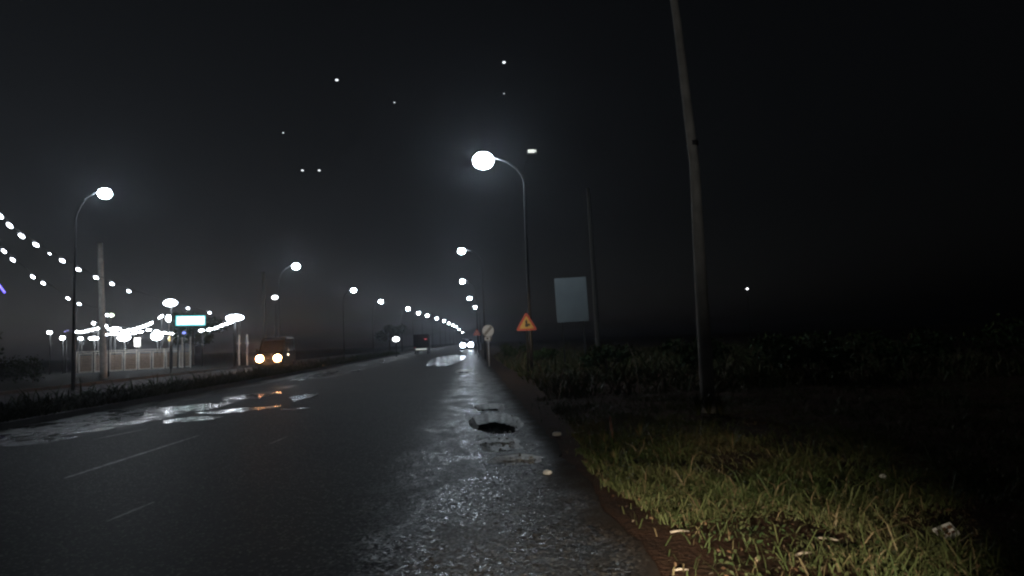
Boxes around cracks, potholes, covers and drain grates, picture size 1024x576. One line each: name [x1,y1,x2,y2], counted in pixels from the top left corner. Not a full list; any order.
pothole [473,403,505,411]
pothole [475,437,523,452]
pothole [486,453,544,466]
pothole [469,412,524,434]
